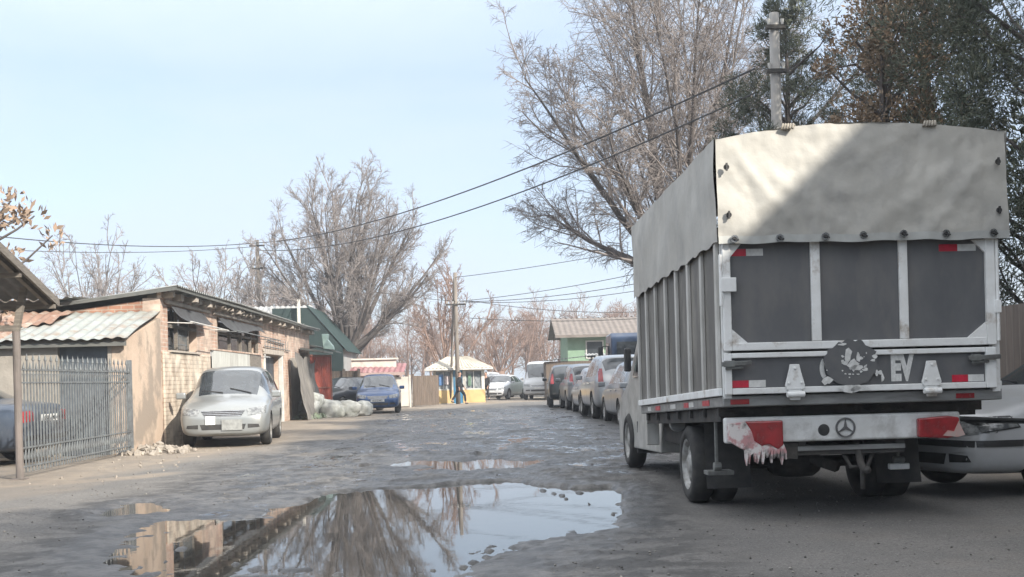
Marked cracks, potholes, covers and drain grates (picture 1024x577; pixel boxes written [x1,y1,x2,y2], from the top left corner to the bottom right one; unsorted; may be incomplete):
pothole [34,476,666,577]
pothole [346,451,599,475]
